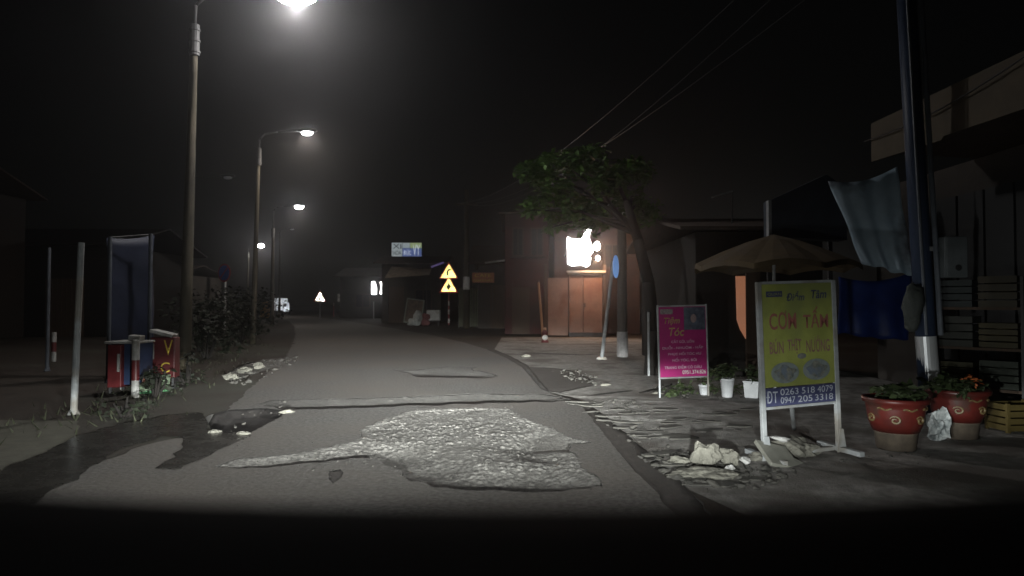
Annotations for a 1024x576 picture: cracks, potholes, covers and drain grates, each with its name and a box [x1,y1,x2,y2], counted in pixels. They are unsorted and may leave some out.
pothole [229,358,293,382]
pothole [215,407,602,492]
pothole [525,367,593,393]
